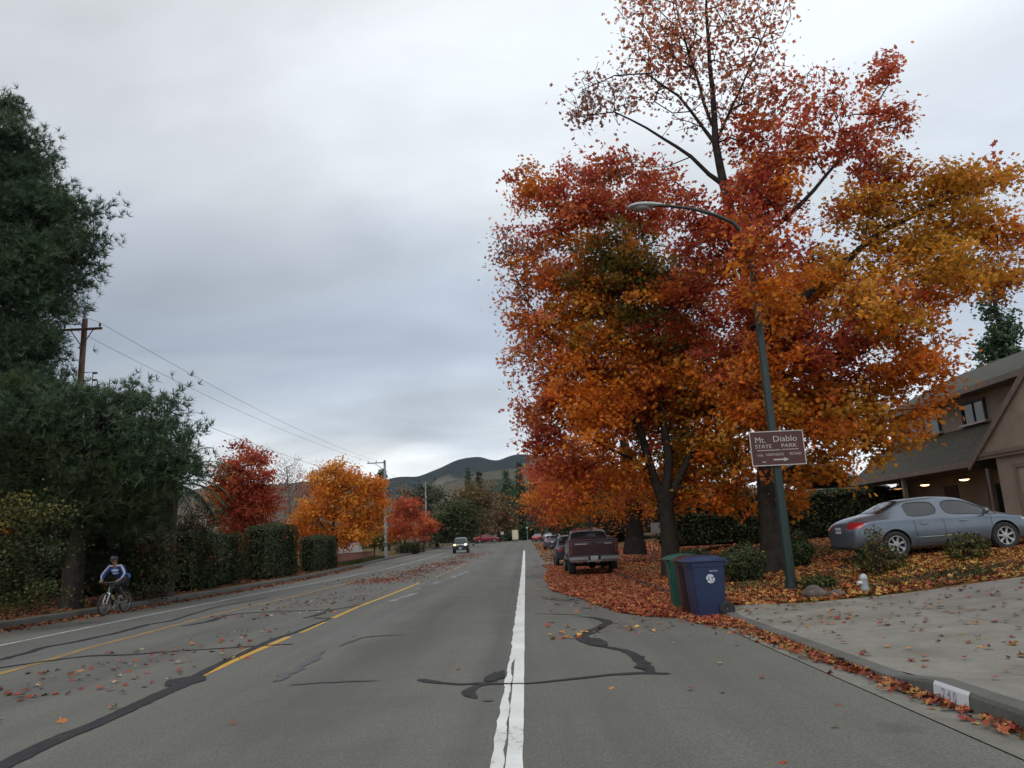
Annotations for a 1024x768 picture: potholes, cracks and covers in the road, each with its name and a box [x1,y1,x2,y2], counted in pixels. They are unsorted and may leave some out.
crack [274,634,403,685]
